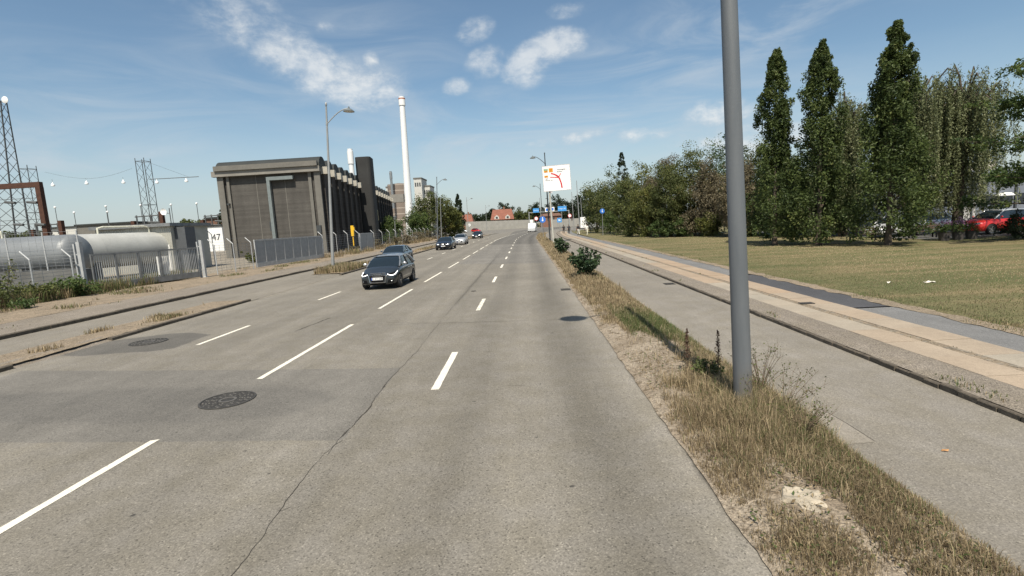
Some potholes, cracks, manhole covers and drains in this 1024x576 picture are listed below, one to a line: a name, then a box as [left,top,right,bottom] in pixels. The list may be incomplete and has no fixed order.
manhole cover [198,391,256,410]
crack [231,263,491,576]
manhole cover [128,338,168,346]
